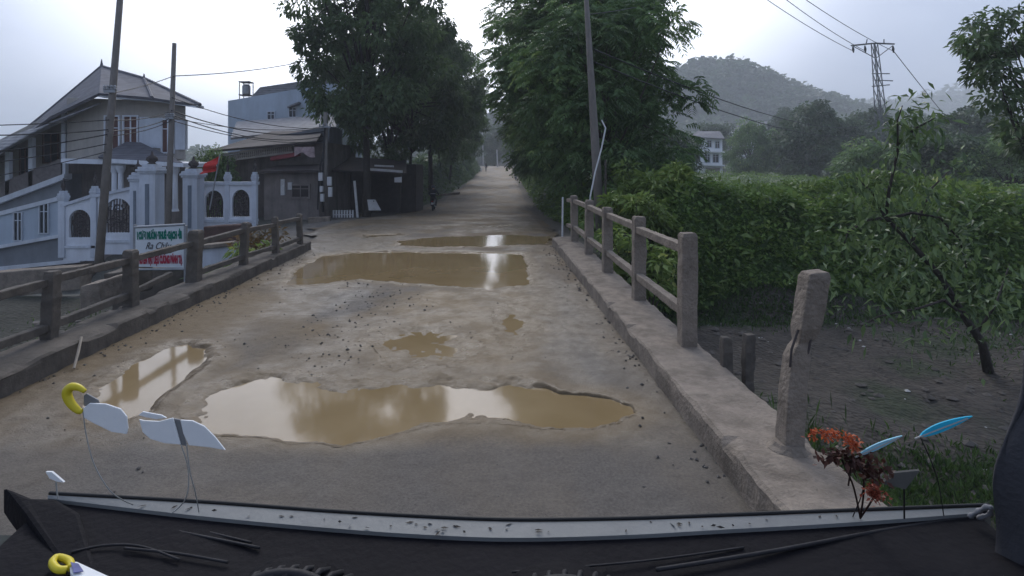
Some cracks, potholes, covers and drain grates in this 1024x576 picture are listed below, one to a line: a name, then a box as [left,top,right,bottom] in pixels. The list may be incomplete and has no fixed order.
pothole [394,235,552,248]
pothole [174,369,642,447]
pothole [75,338,220,423]
pothole [358,324,494,372]
pothole [278,250,534,291]
